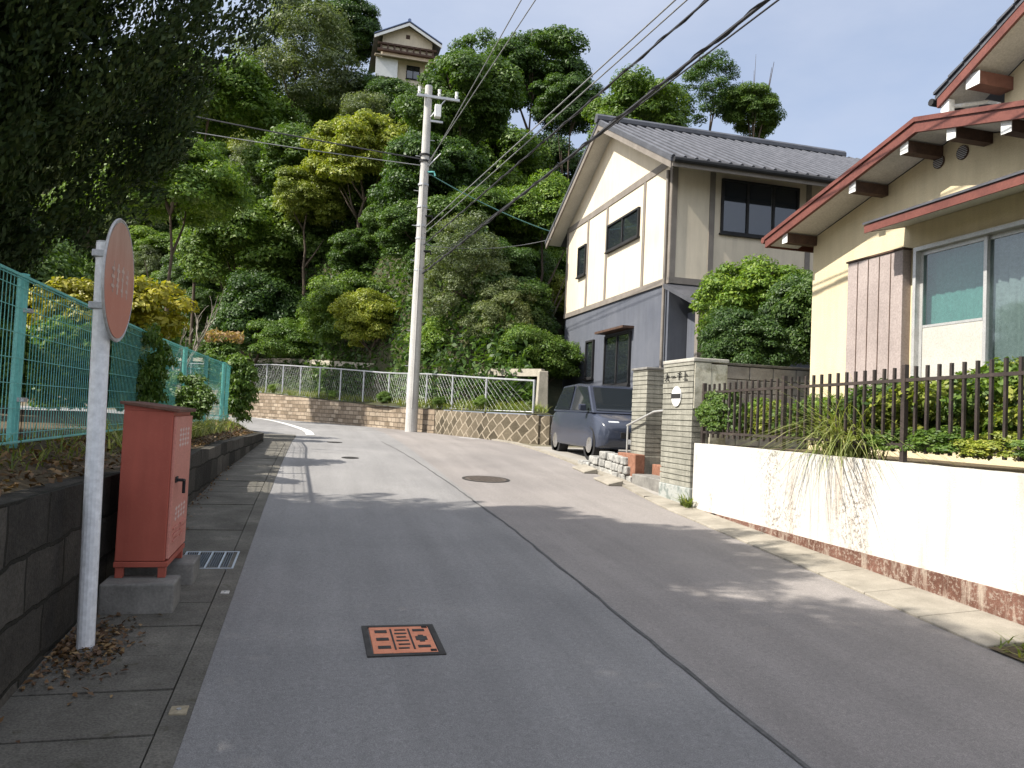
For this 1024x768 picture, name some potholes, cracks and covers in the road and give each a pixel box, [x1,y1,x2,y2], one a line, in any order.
manhole cover [361,624,446,658]
drain grate [184,551,240,569]
